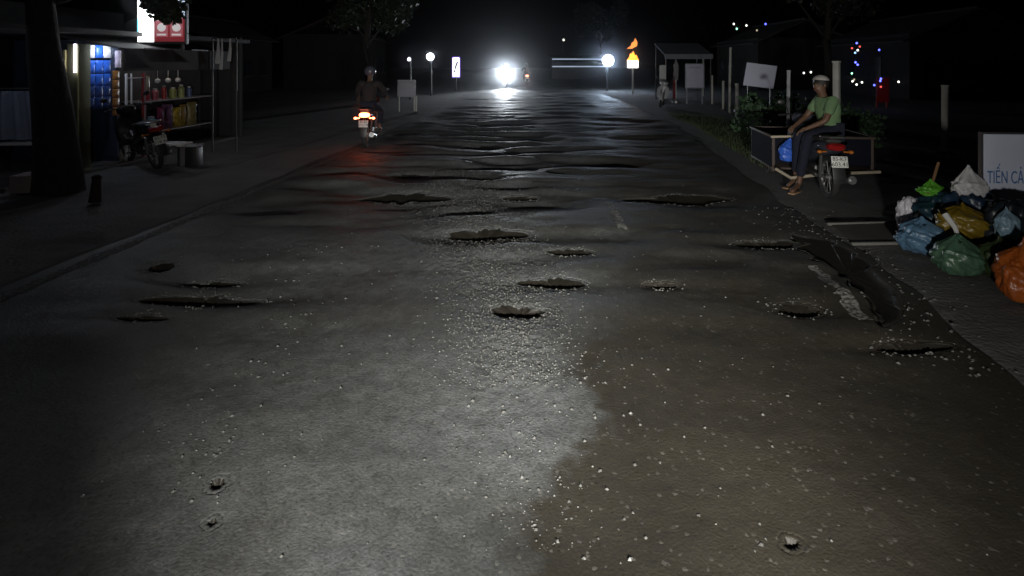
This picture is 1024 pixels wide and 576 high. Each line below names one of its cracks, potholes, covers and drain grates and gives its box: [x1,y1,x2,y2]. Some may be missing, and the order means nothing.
pothole [777,532,806,555]
pothole [512,276,591,291]
pothole [176,279,246,289]
pothole [444,227,533,243]
pothole [543,248,597,258]
pothole [641,281,681,290]
pothole [111,313,175,323]
pothole [872,340,959,356]
pothole [731,240,811,250]
pothole [789,234,904,328]
pothole [487,303,548,321]
pothole [203,474,233,494]
